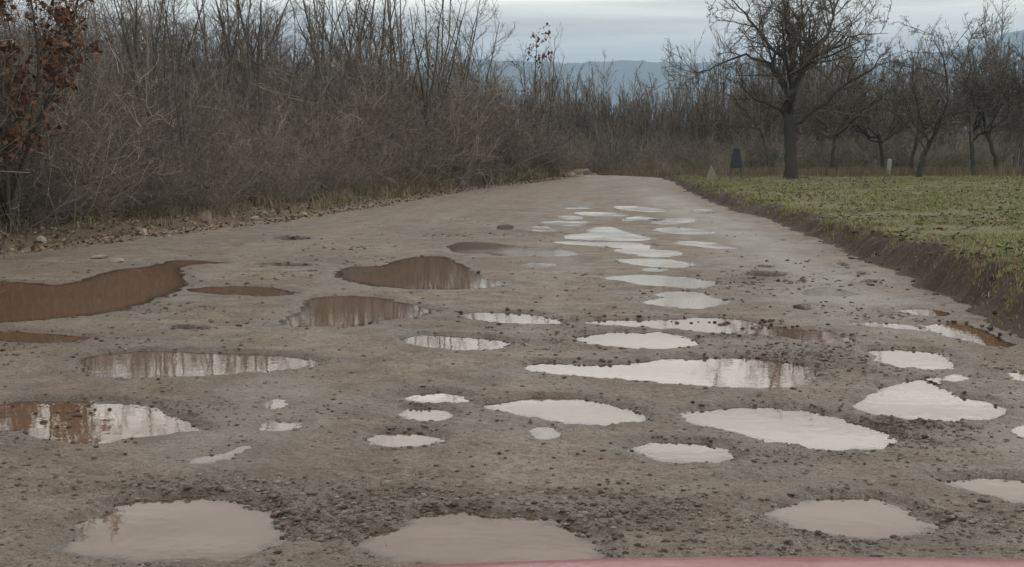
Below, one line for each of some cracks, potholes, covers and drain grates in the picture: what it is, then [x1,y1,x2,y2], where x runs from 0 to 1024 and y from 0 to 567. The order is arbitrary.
pothole [612,432,756,465]
pothole [834,370,1021,423]
pothole [320,254,520,290]
pothole [0,393,225,445]
